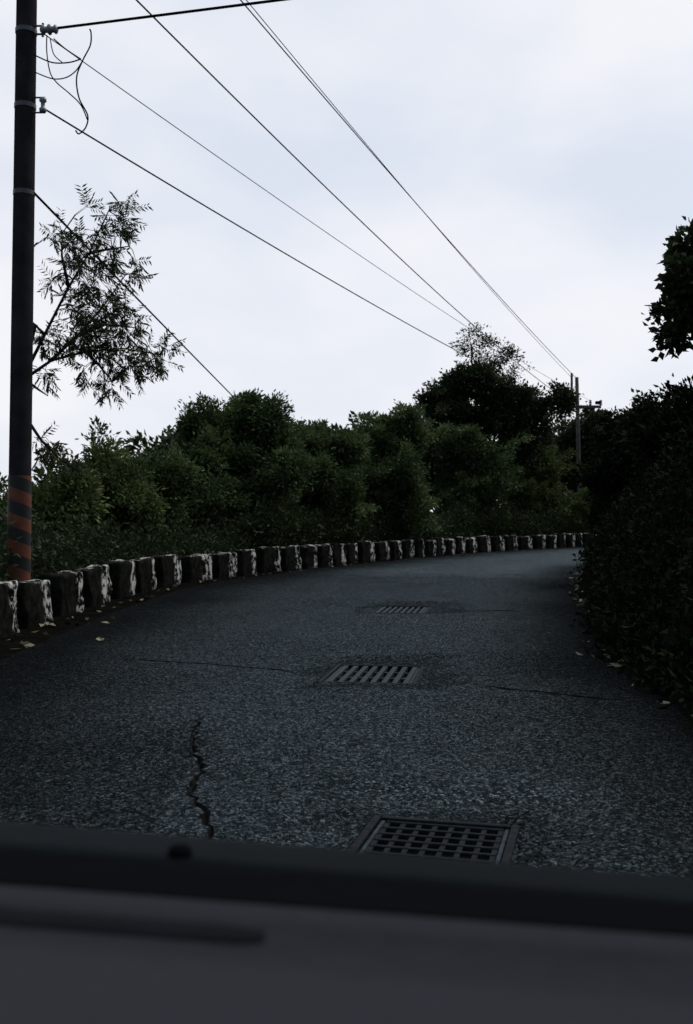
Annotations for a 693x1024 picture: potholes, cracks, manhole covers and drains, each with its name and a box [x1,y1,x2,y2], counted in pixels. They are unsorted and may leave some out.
crack [181,715,214,839]
